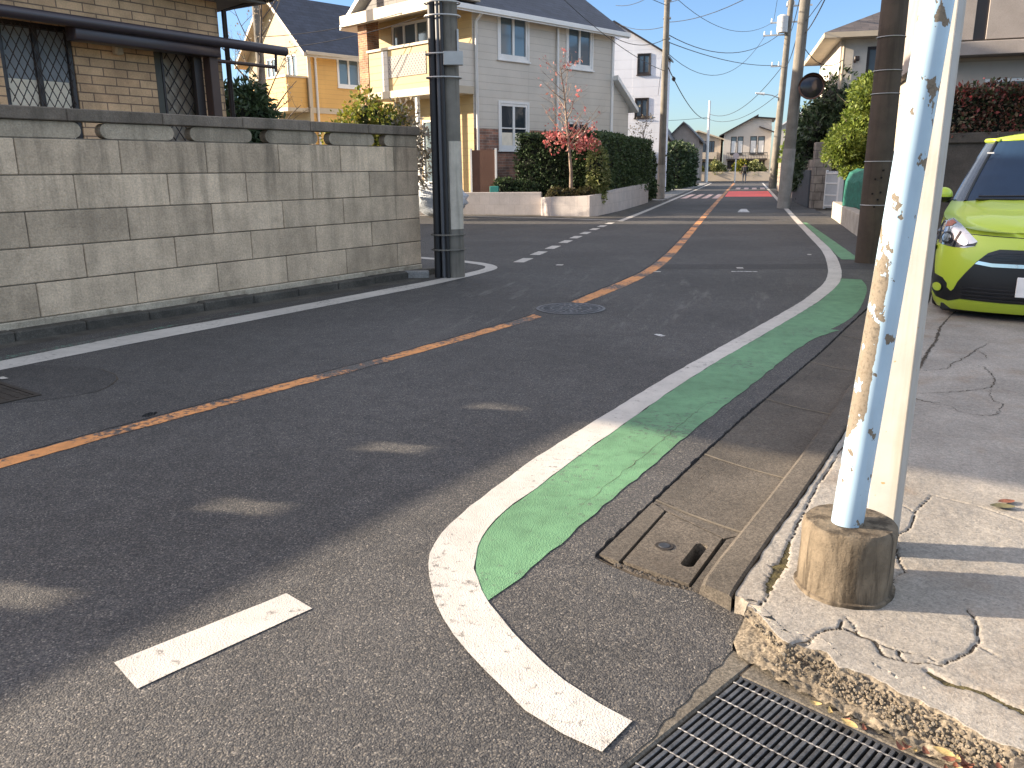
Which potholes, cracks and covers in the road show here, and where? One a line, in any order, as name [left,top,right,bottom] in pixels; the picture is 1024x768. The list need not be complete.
drain grate [632,676,936,768]
manhole cover [536,303,605,315]
crack [793,610,1024,715]
